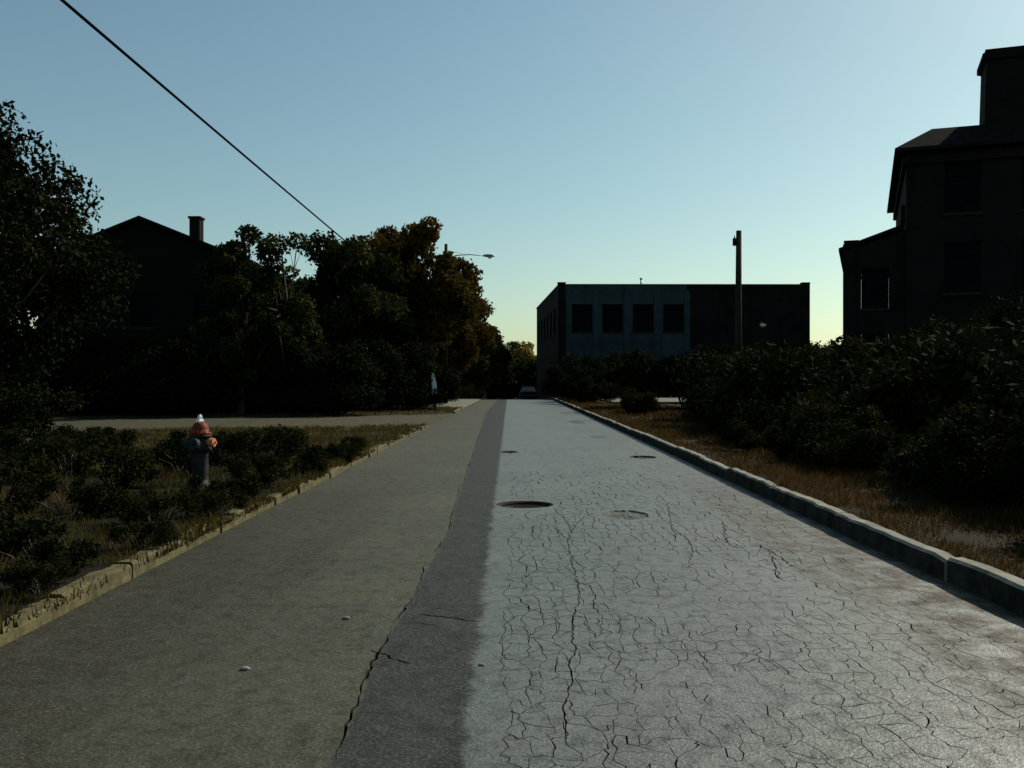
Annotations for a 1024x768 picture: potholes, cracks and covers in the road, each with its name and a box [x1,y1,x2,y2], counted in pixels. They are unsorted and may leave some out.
crack [495,452,1024,768]
crack [409,609,479,626]
